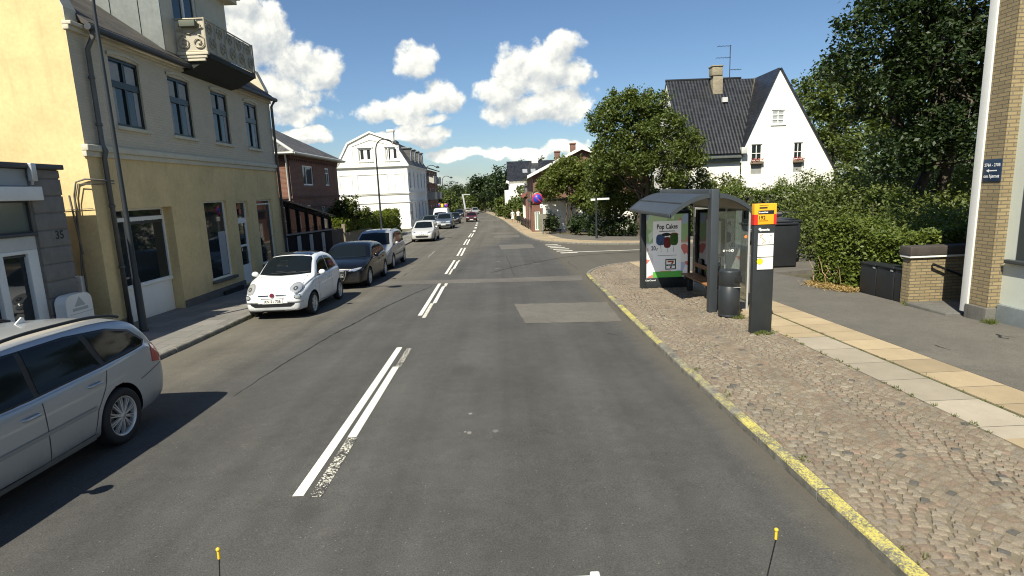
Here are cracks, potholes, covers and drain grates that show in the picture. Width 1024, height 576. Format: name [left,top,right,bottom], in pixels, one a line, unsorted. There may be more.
crack [234,286,432,396]
